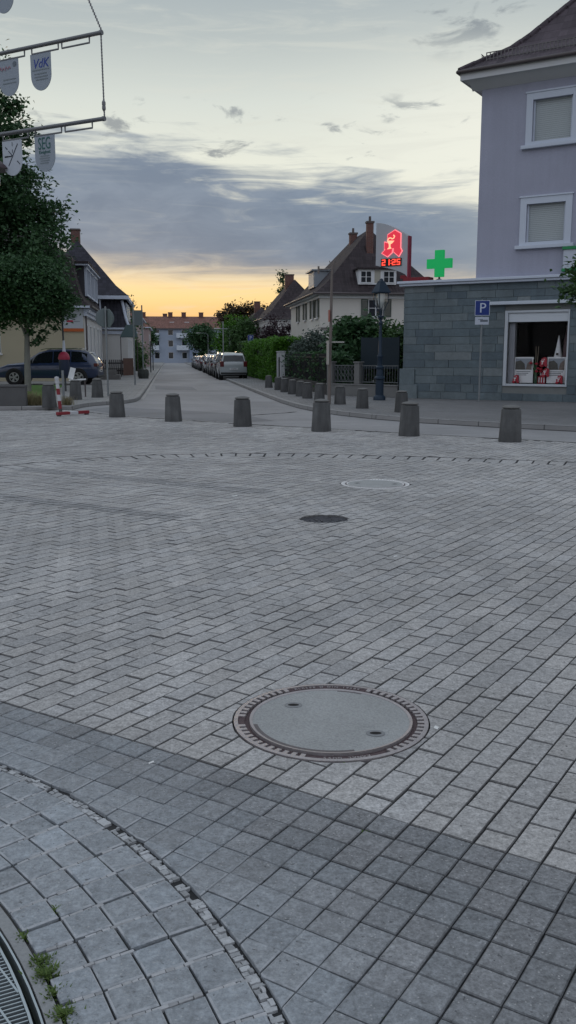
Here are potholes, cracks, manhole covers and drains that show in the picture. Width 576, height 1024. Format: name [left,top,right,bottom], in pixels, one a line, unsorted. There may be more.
manhole cover [234,684,429,764]
manhole cover [341,479,409,489]
drain grate [0,907,63,1024]
